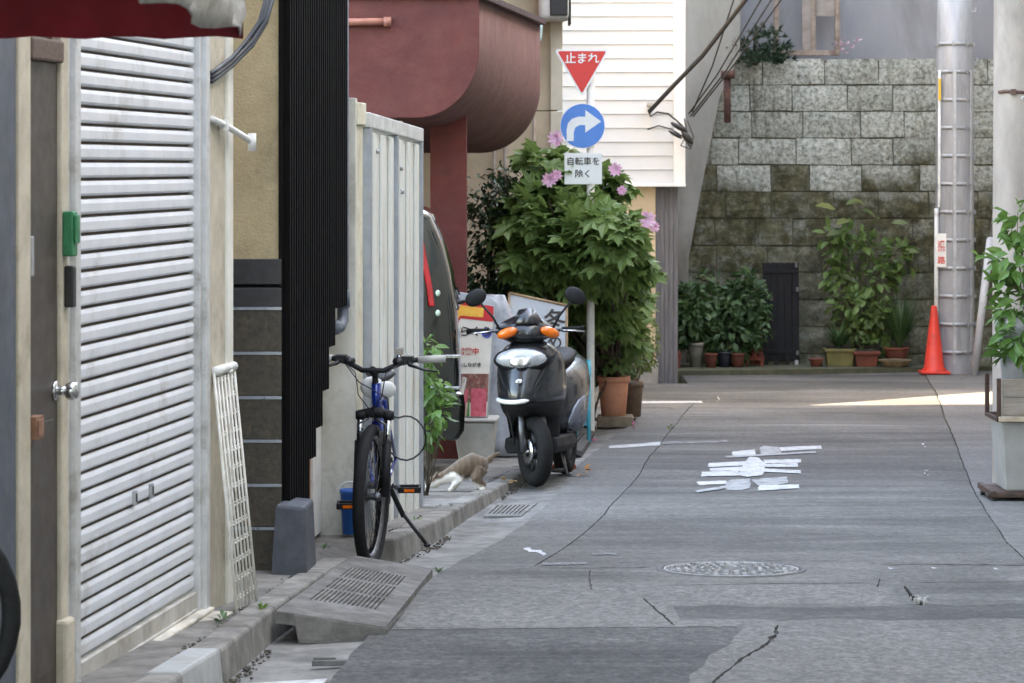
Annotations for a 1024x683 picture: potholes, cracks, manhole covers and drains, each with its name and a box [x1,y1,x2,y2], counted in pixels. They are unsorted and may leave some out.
crack [643,598,674,625]
crack [712,625,780,683]
manhole cover [655,561,807,578]
drain grate [483,502,538,519]
crack [925,374,1024,559]
